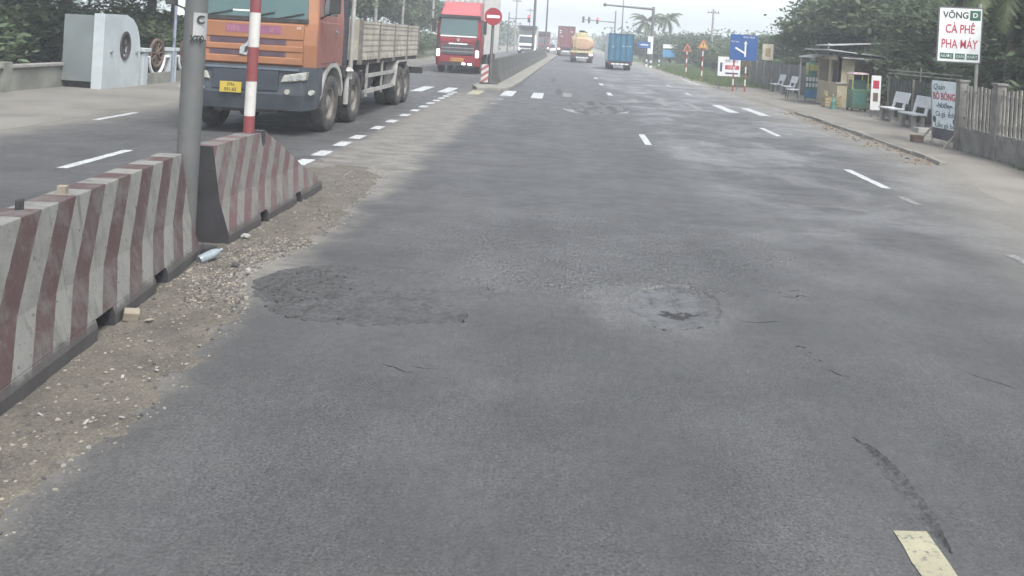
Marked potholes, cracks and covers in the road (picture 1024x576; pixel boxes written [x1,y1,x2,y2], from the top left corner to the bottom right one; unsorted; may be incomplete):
pothole [619,284,722,331]
